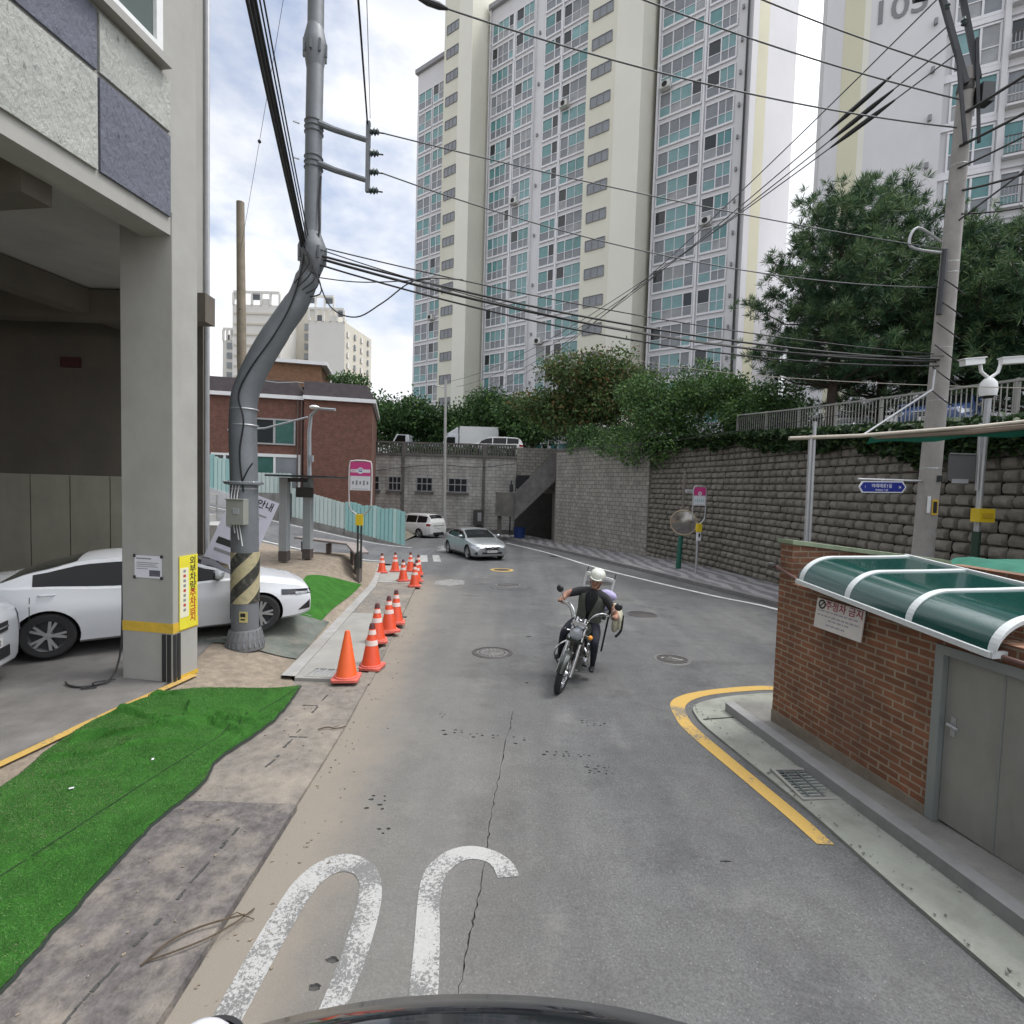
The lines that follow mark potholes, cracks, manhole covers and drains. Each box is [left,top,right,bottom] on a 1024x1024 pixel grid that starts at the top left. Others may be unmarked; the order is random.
manhole cover [472,647,513,659]
drain grate [304,667,359,678]
crack [441,713,525,994]
drain grate [770,768,841,801]
manhole cover [653,654,692,665]
